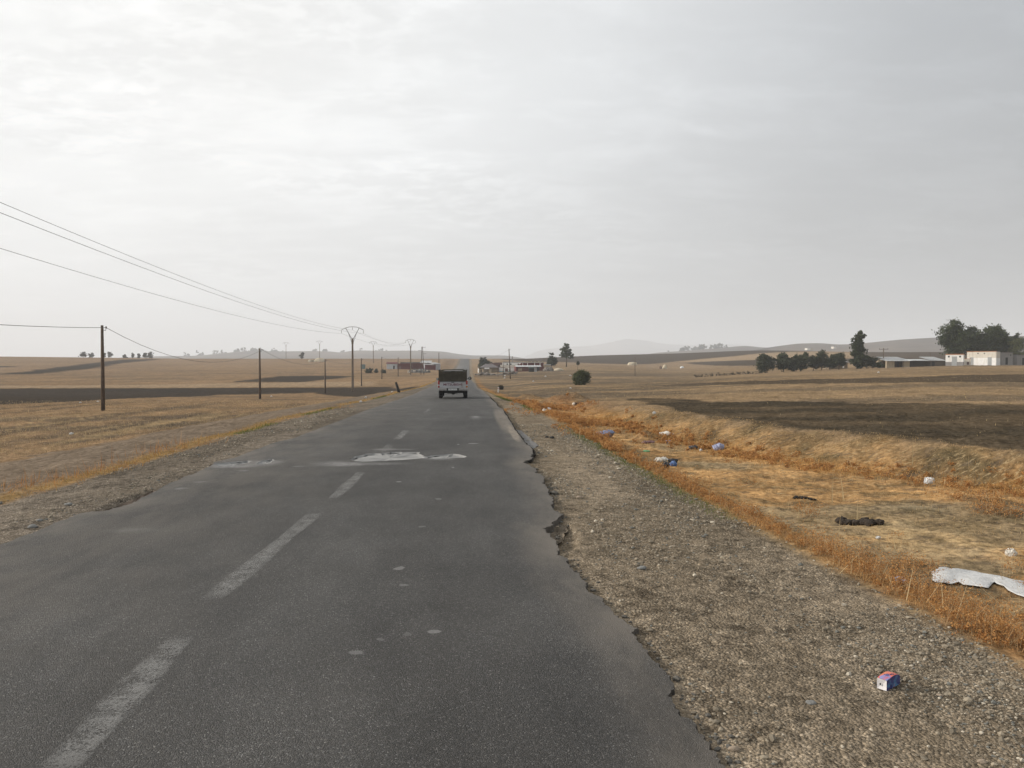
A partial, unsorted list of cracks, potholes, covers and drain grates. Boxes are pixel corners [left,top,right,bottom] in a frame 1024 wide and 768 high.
pothole [550,523,568,545]
pothole [351,452,424,462]
